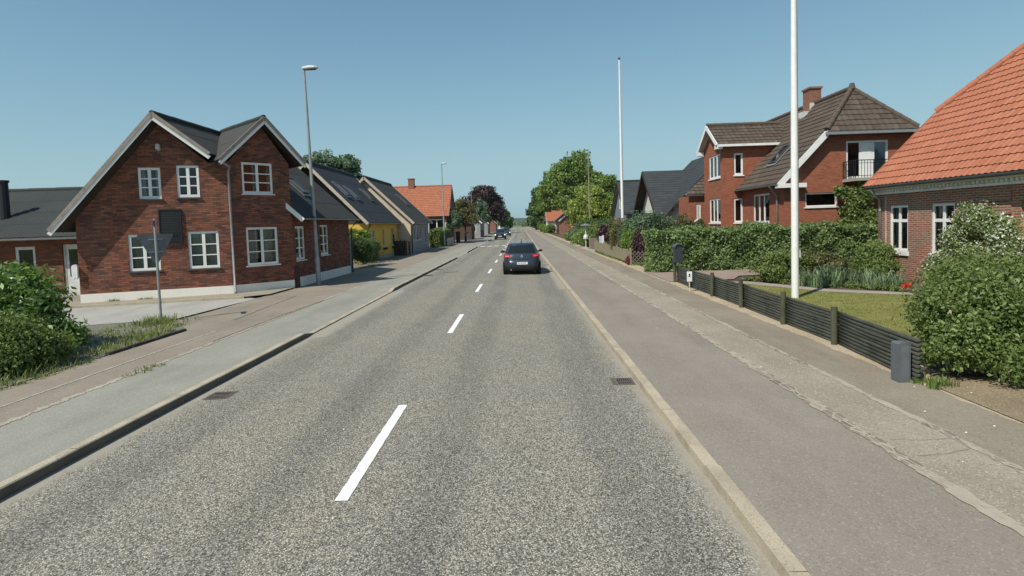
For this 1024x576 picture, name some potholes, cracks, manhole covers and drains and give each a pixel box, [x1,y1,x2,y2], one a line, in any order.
drain grate [202,391,239,400]
